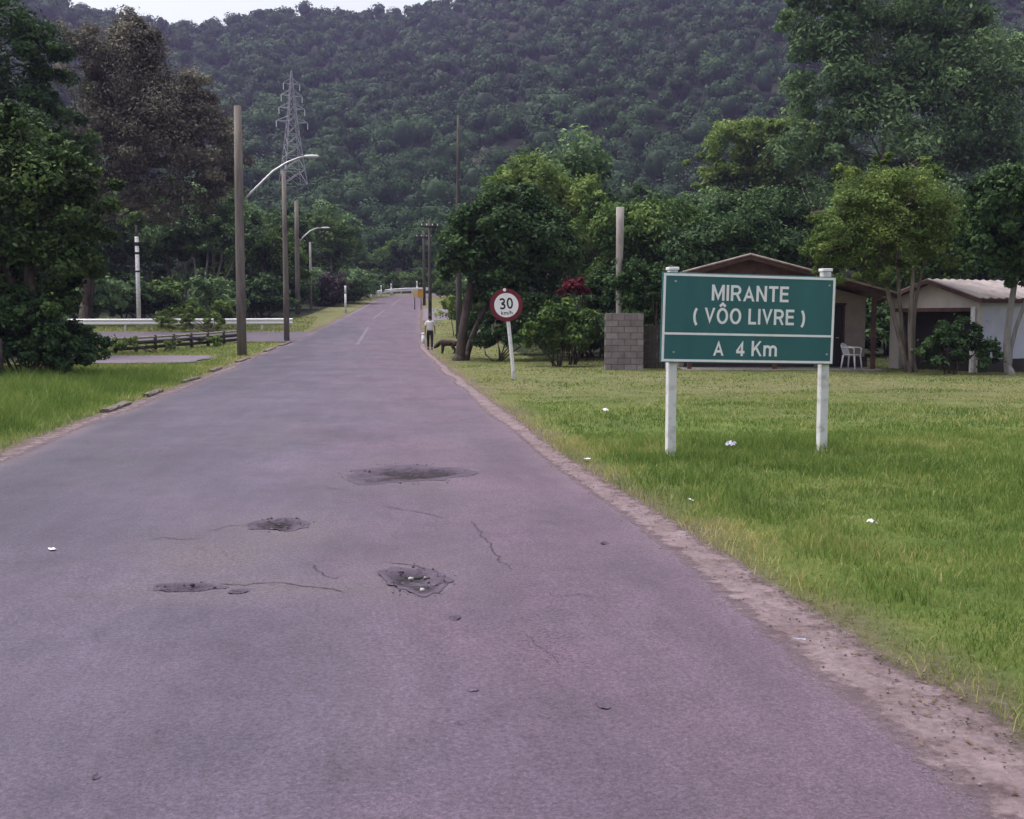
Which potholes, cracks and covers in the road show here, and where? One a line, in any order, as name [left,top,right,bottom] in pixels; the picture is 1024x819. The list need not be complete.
pothole [138,581,228,592]
crack [221,564,342,592]
pothole [378,563,456,597]
pothole [245,517,314,532]
crack [471,521,513,570]
pothole [340,463,478,485]
